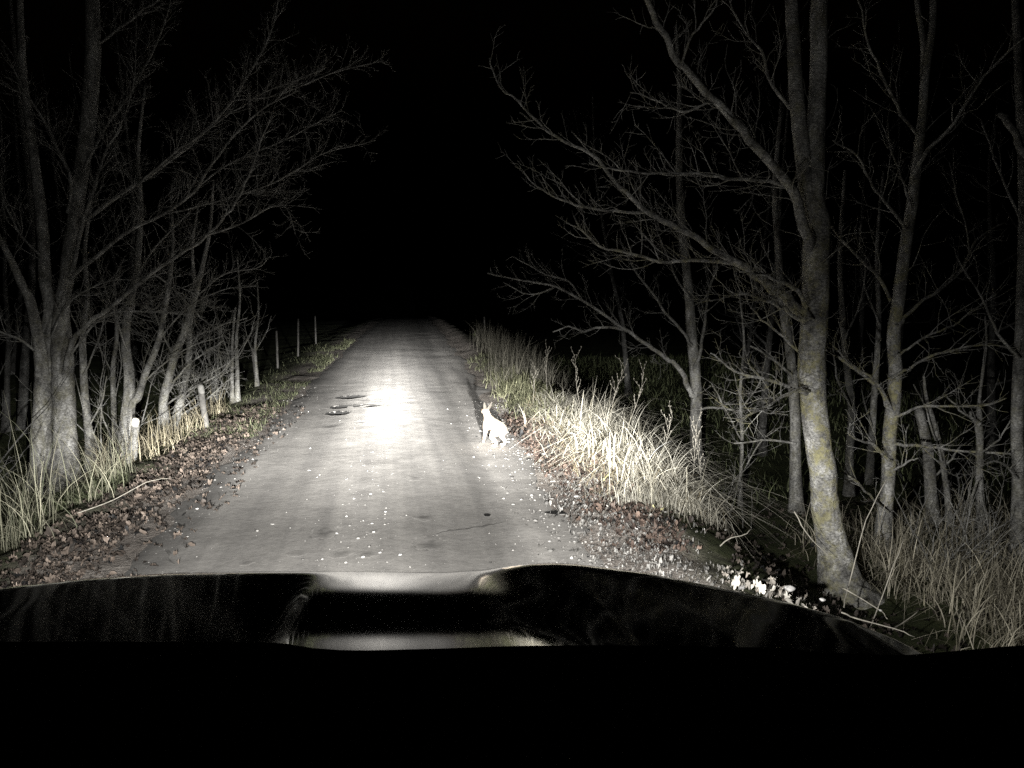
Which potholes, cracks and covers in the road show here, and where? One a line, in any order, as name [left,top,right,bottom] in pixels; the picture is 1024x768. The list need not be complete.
crack [435,522,503,535]
